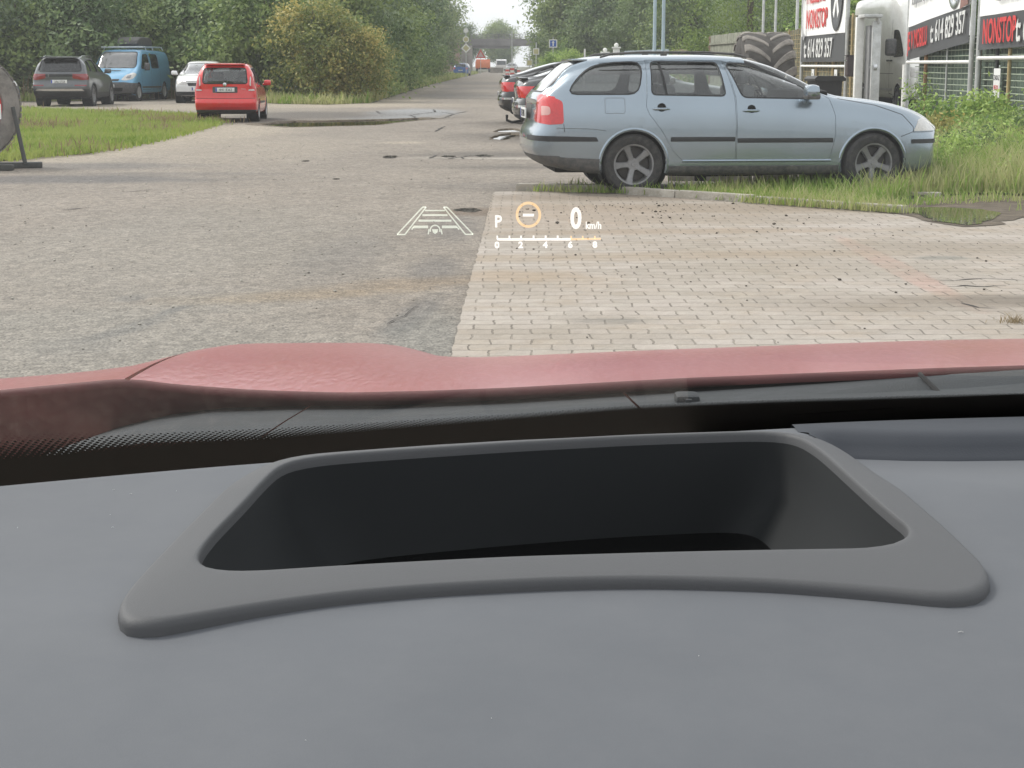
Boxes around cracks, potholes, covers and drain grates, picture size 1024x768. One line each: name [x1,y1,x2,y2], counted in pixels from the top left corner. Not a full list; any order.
pothole [489,133,519,141]
